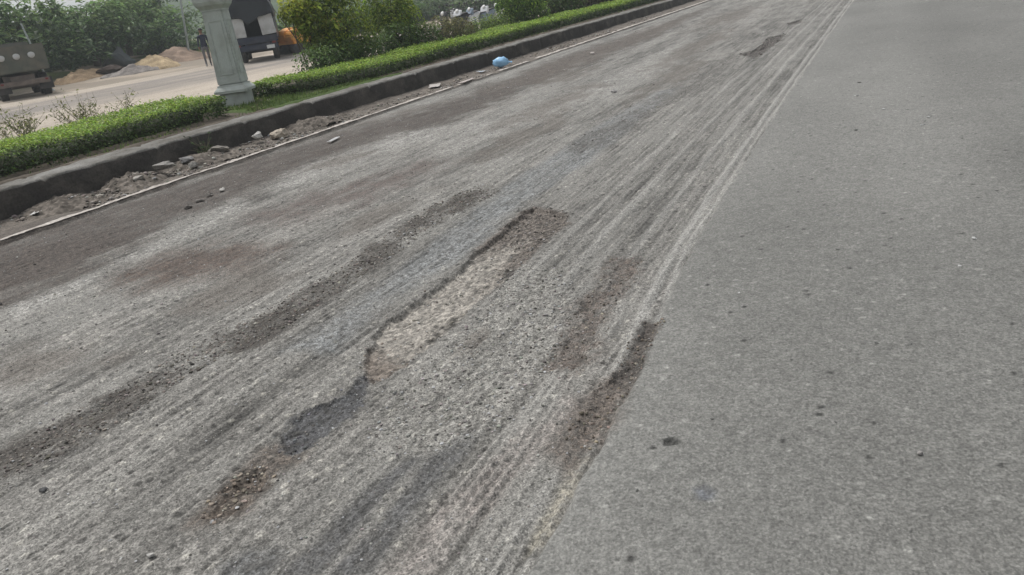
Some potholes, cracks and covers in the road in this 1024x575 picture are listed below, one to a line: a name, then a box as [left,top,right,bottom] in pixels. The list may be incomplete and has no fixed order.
pothole [744,34,786,59]
pothole [572,320,661,447]
pothole [278,376,368,456]
pothole [202,468,273,522]
pothole [360,207,567,386]
